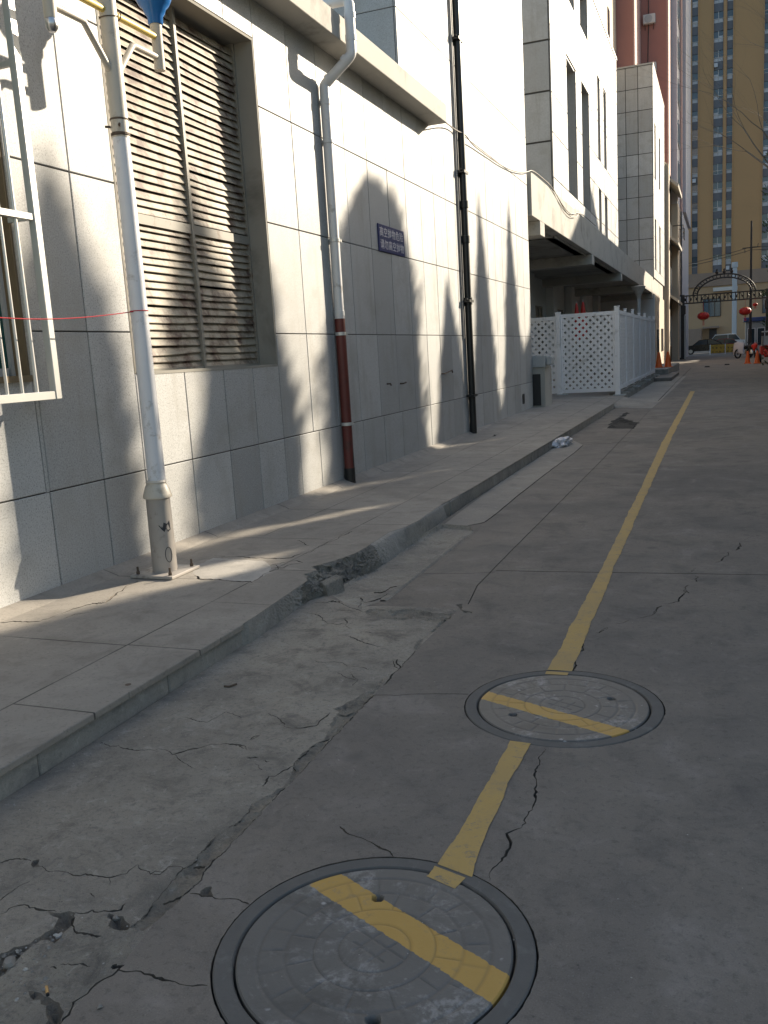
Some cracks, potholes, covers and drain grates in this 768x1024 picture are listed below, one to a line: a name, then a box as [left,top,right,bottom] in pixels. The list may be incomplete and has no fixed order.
manhole cover [210,857,539,1024]
pothole [107,913,130,931]
manhole cover [464,670,666,748]
crack [0,586,415,938]
crack [489,748,546,877]
crack [52,963,208,1023]
crack [573,536,754,671]
